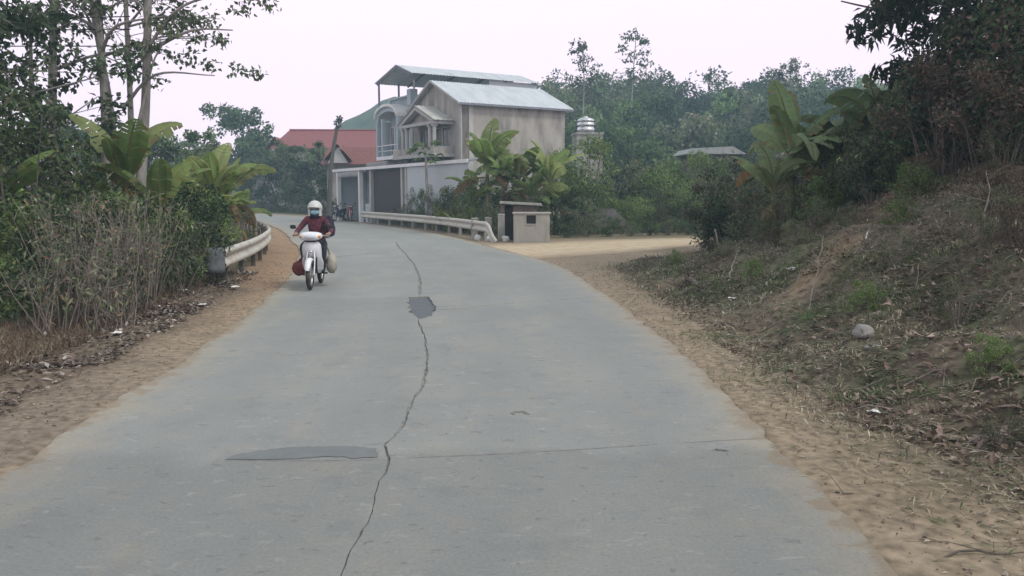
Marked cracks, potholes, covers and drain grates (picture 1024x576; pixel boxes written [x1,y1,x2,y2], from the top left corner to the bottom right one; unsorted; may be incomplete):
crack [237,243,762,576]
